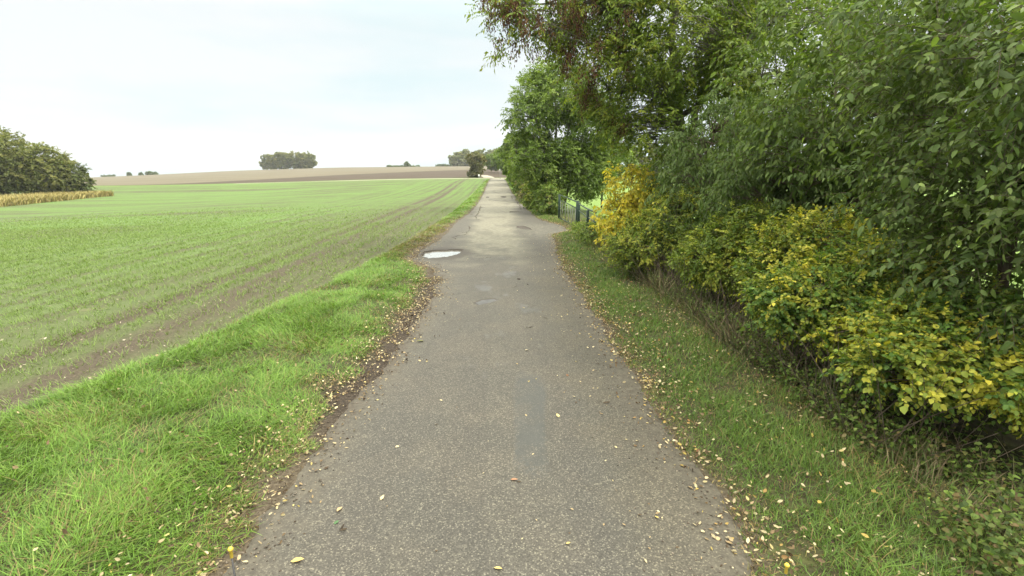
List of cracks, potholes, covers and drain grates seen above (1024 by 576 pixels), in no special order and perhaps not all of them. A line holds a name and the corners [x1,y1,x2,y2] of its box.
pothole [422,249,463,258]
